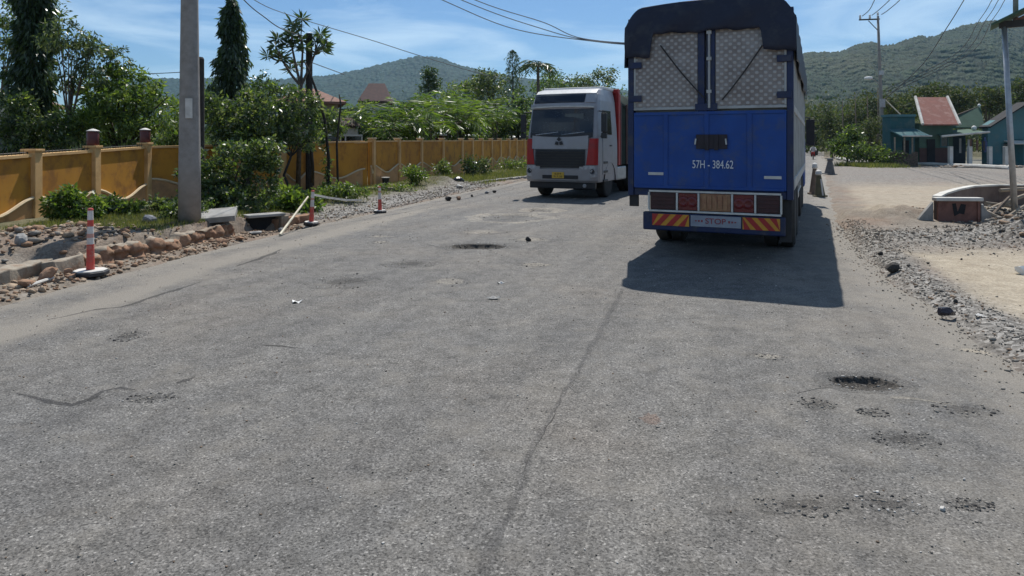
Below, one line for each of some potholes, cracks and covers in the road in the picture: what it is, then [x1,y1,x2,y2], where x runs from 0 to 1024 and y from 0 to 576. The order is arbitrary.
crack [15,386,135,408]
pothole [863,430,945,451]
pothole [811,371,923,395]
pothole [436,242,521,250]
pothole [852,490,925,517]
pothole [931,402,1002,417]
pothole [797,397,839,410]
pothole [749,494,849,518]
crack [523,390,565,480]
crack [152,377,195,399]
